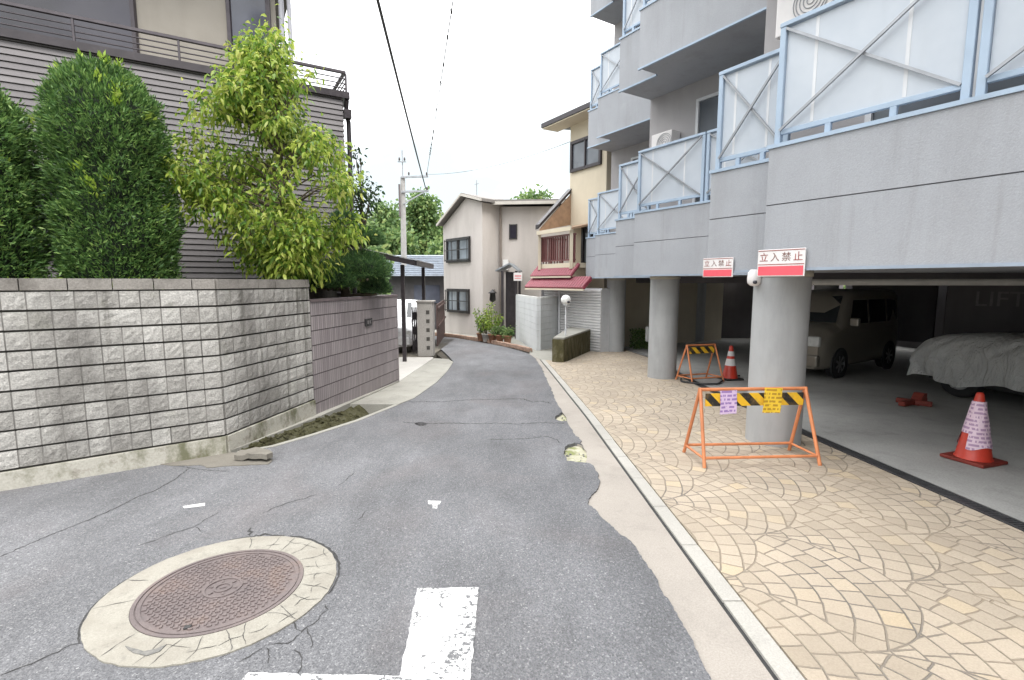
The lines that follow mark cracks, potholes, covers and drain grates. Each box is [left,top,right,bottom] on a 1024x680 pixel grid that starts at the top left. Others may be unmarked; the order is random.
pothole [564,446,587,463]
crack [1,495,341,675]
manhole cover [80,536,337,668]
